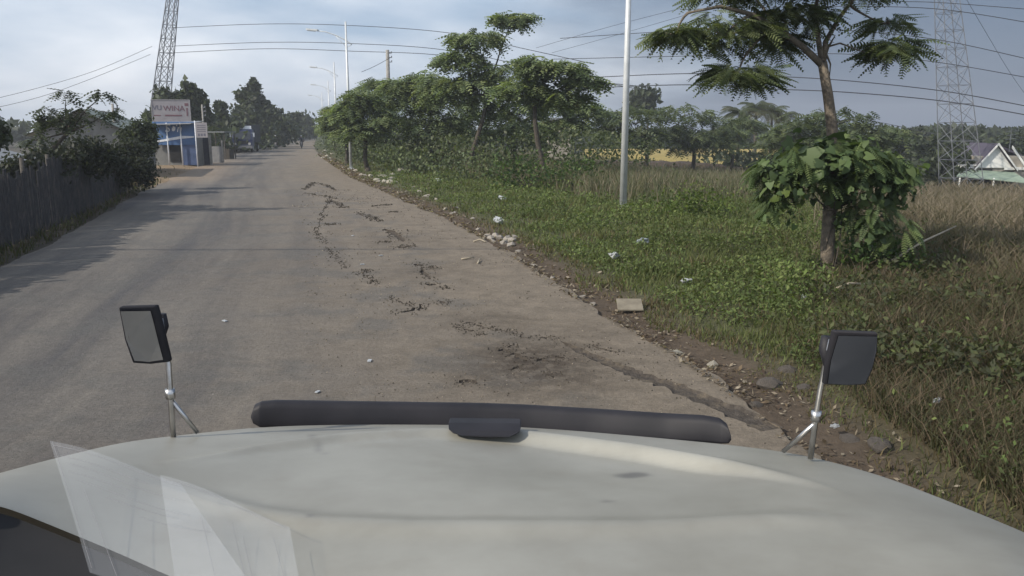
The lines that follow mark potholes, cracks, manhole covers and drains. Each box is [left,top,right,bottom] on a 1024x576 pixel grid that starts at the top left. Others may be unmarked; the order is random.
crack [305,182,376,284]
